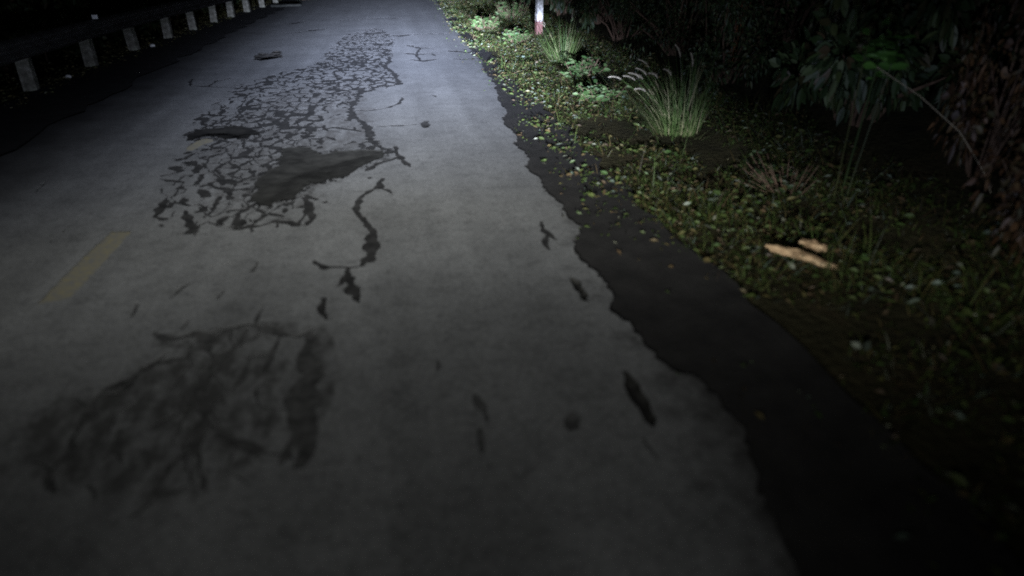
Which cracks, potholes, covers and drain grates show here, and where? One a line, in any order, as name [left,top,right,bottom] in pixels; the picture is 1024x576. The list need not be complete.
pothole [187,126,259,141]
crack [540,221,557,250]
pothole [250,147,386,207]
crack [30,17,478,520]
pothole [563,412,580,431]
